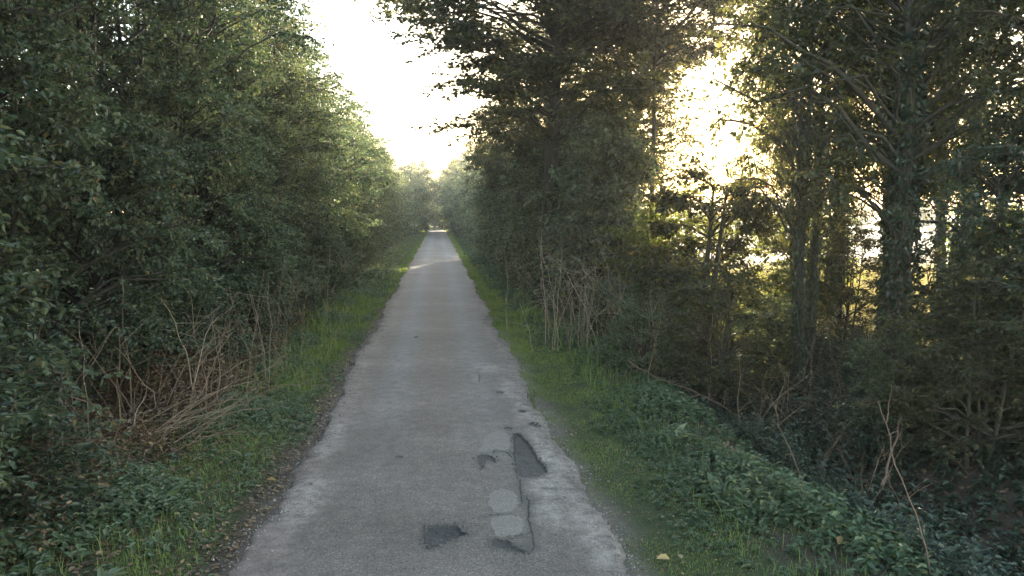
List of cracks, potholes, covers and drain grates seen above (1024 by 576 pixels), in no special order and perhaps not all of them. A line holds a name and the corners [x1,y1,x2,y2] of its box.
pothole [492,539,525,554]
pothole [512,433,548,478]
pothole [422,524,465,549]
crack [514,479,535,552]
pothole [477,454,496,468]
